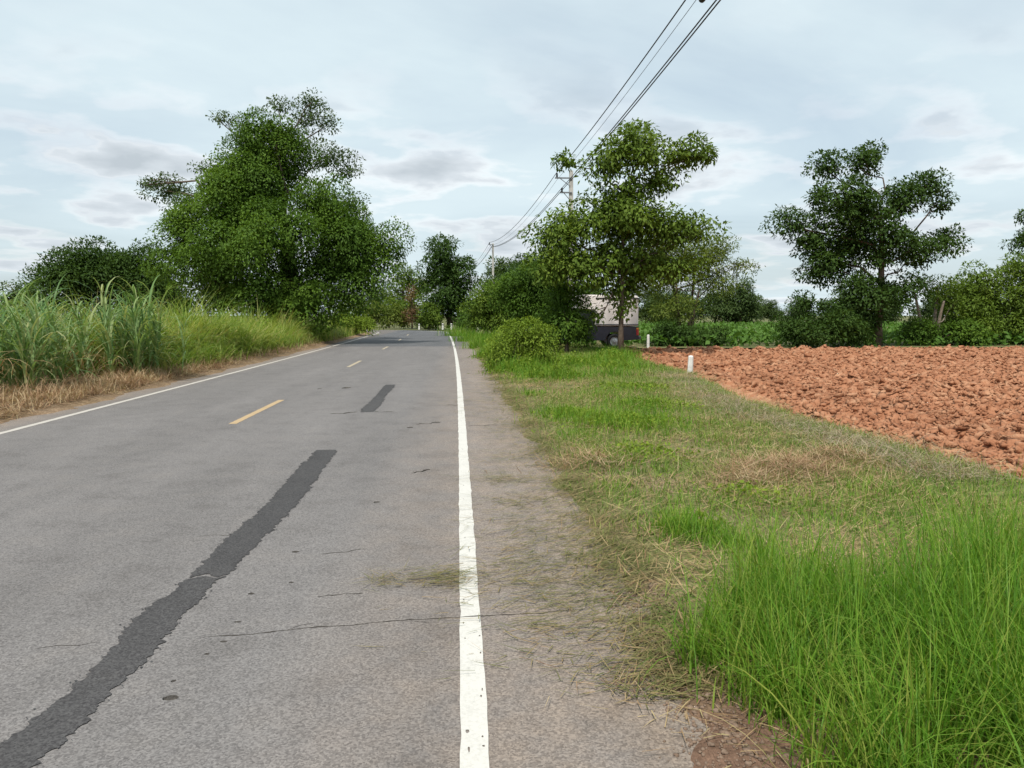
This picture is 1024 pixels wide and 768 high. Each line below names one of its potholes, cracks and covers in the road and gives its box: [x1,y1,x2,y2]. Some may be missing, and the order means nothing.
crack [196,610,564,639]
